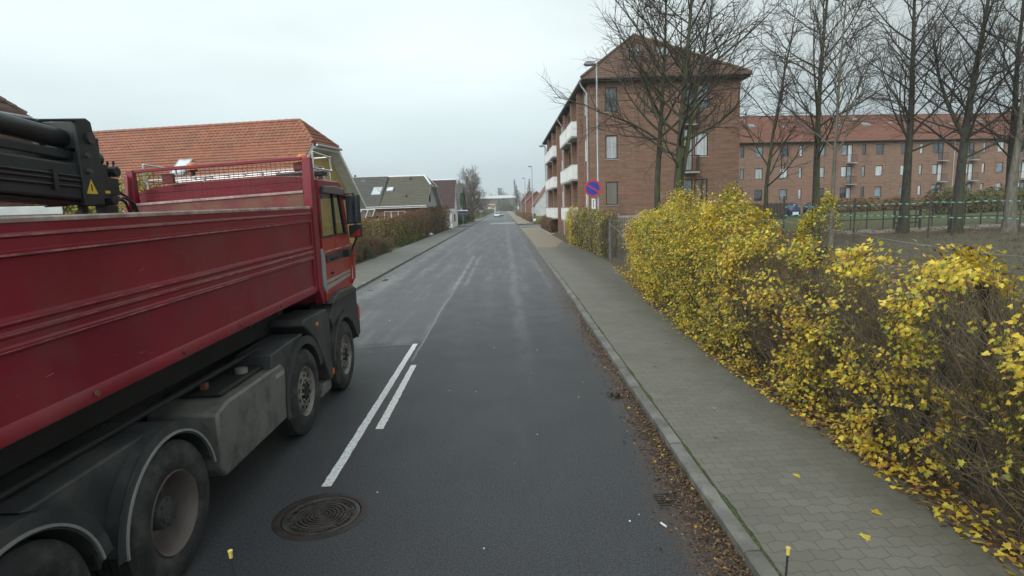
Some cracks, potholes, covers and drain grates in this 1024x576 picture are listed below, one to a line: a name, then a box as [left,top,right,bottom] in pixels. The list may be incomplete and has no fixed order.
manhole cover [271,492,369,541]
drain grate [651,493,685,509]
